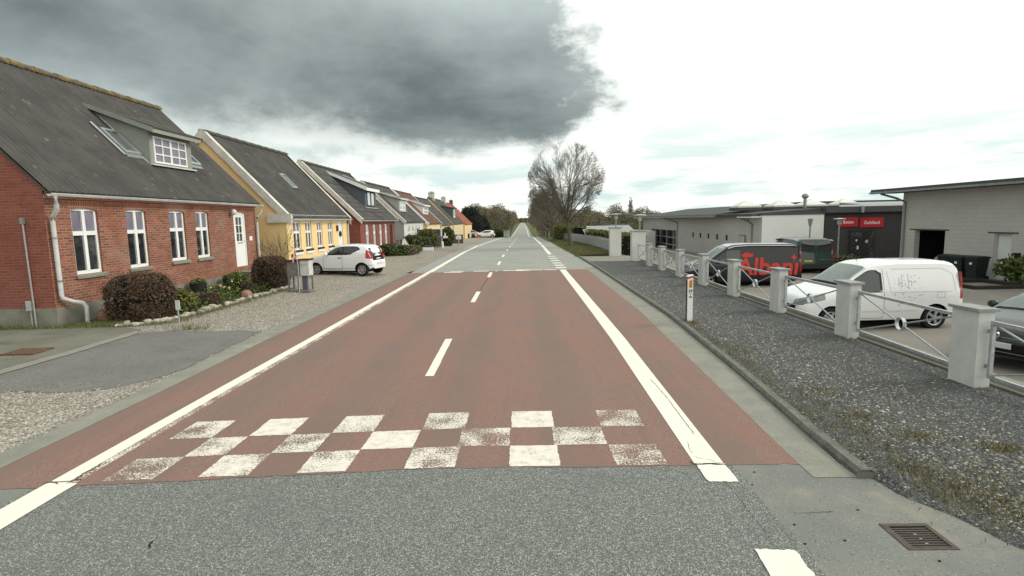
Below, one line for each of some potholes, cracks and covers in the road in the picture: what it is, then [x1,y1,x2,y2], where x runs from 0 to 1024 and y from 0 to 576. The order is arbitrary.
drain grate [879,523,960,550]
crack [651,379,726,465]
manhole cover [0,347,55,356]
